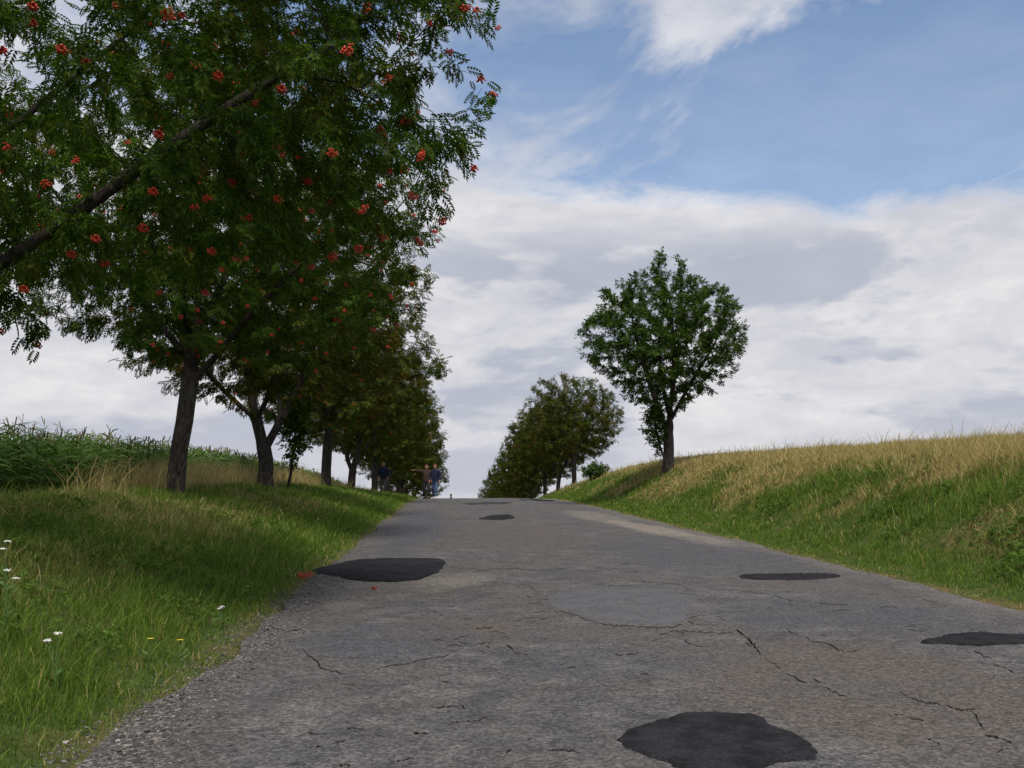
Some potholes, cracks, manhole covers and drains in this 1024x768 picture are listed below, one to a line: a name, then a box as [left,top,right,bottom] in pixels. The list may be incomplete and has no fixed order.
crack [430,705,487,726]
crack [303,649,345,675]
crack [506,738,576,753]
crack [895,693,1011,752]
crack [382,567,845,697]
crack [787,629,858,652]
crack [305,727,414,762]
